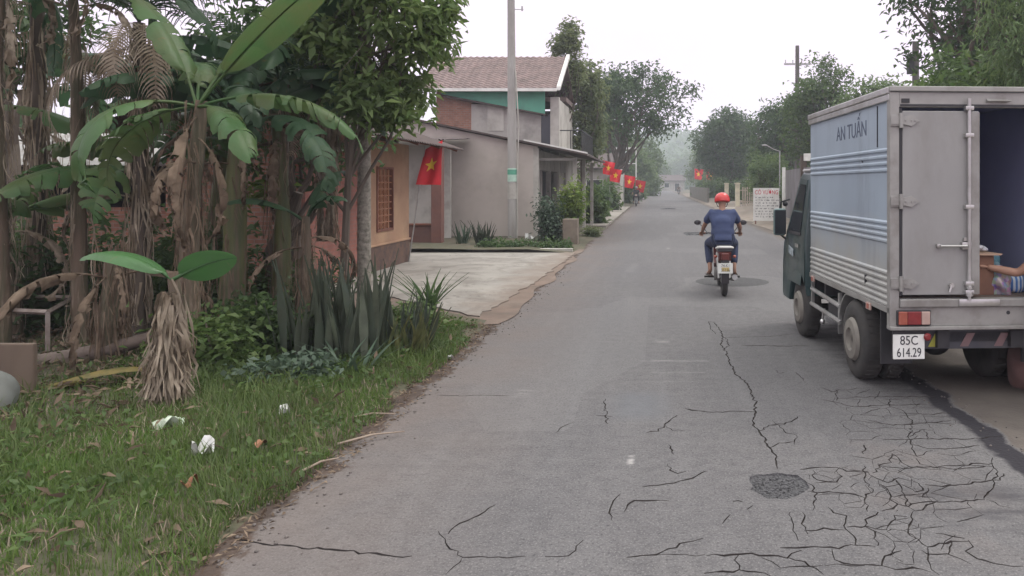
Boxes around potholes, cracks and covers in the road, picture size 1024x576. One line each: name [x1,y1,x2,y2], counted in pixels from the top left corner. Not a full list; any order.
pothole [749,473,810,499]
crack [234,537,410,558]
crack [608,321,798,520]
crack [626,387,1021,576]
crack [438,505,524,572]
